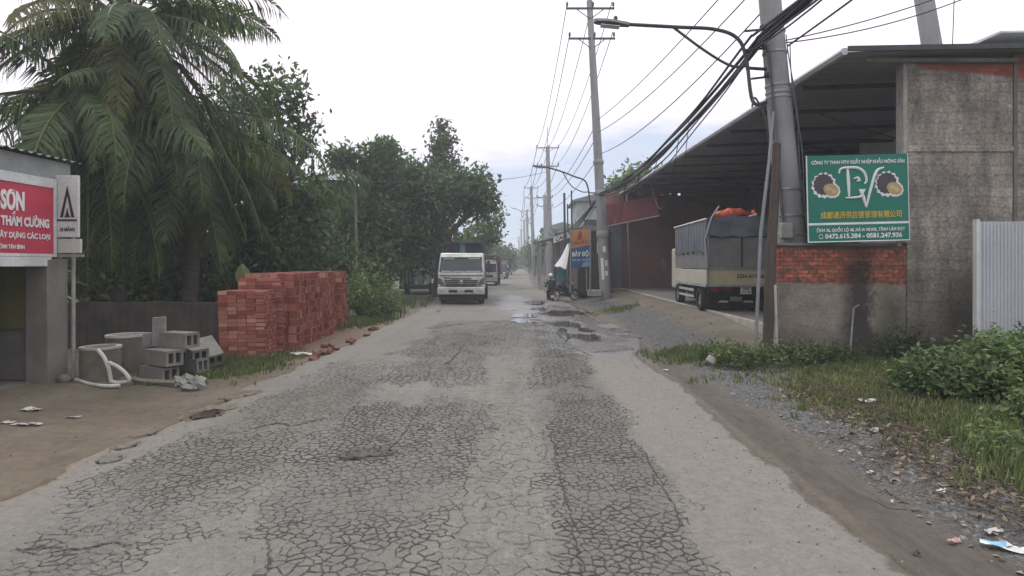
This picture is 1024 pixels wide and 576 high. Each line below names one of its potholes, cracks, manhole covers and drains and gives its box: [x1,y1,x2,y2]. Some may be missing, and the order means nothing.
crack [11,298,731,576]
pothole [335,447,398,459]
pothole [535,309,601,317]
